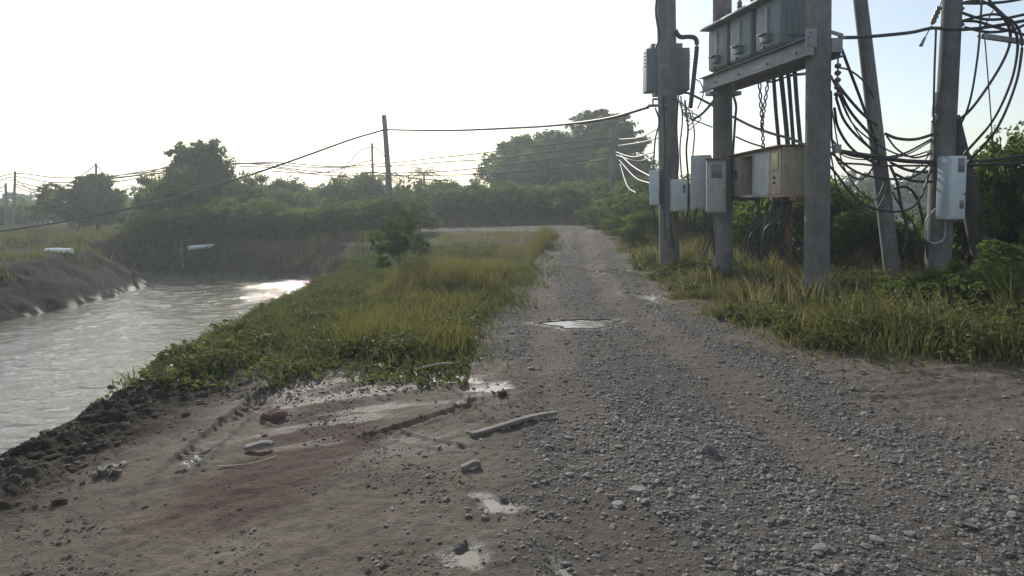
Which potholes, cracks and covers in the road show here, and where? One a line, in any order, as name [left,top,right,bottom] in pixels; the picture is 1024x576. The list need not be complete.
pothole [533,318,622,329]
pothole [622,292,661,302]
